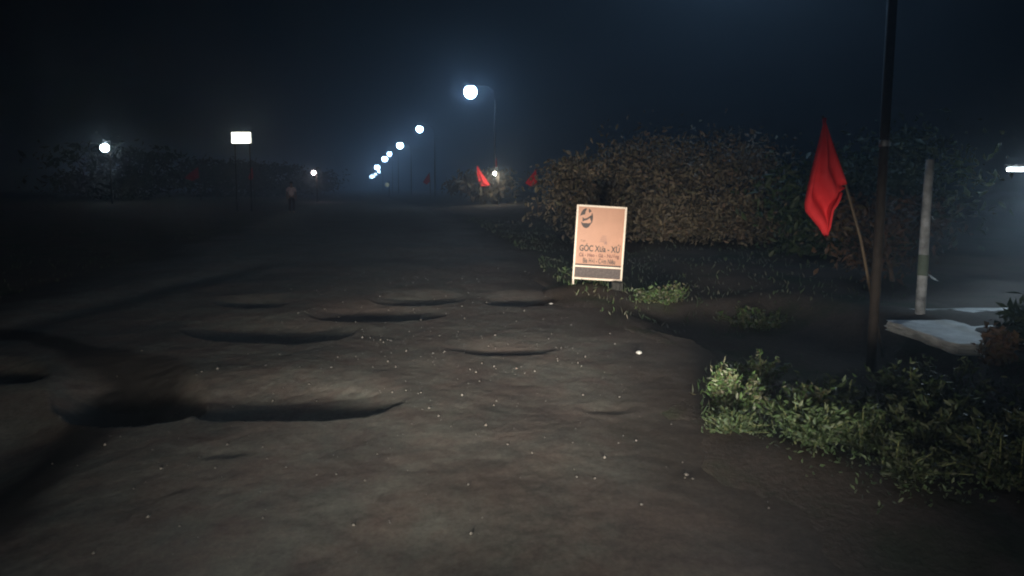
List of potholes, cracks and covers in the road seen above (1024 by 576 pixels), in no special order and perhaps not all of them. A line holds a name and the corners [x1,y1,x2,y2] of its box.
pothole [0,355,51,384]
pothole [365,288,468,305]
pothole [212,293,291,308]
pothole [47,351,201,428]
pothole [574,399,641,416]
pothole [160,366,411,423]
pothole [302,297,450,322]
pothole [445,334,566,356]
pothole [180,439,258,461]
pothole [482,290,553,307]
pothole [178,309,360,344]
